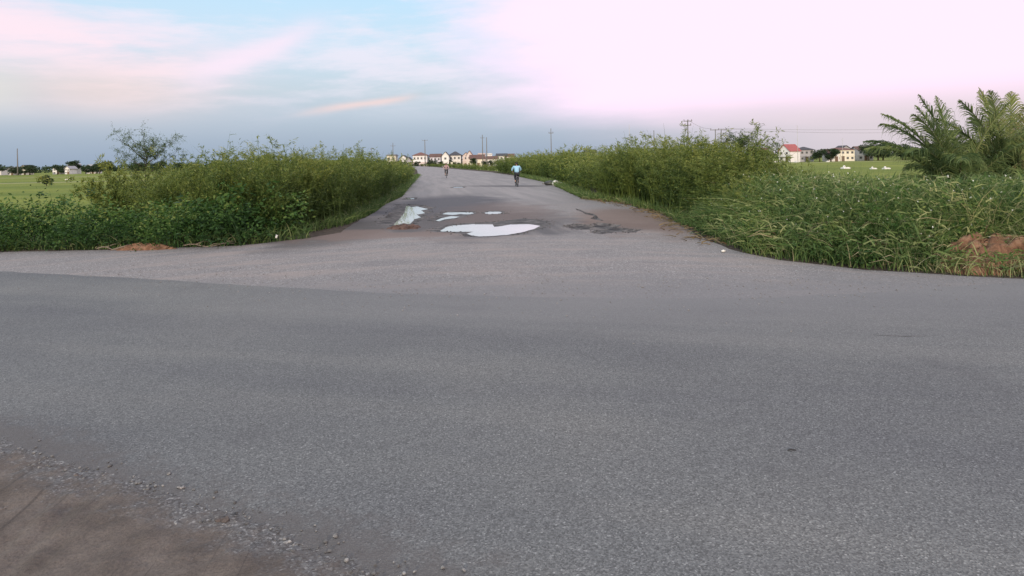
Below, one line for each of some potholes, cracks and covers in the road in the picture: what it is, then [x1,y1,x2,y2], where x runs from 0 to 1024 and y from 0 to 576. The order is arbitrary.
pothole [427,211,478,222]
pothole [563,222,643,234]
crack [576,209,603,221]
pothole [426,218,552,237]
pothole [375,204,440,226]
